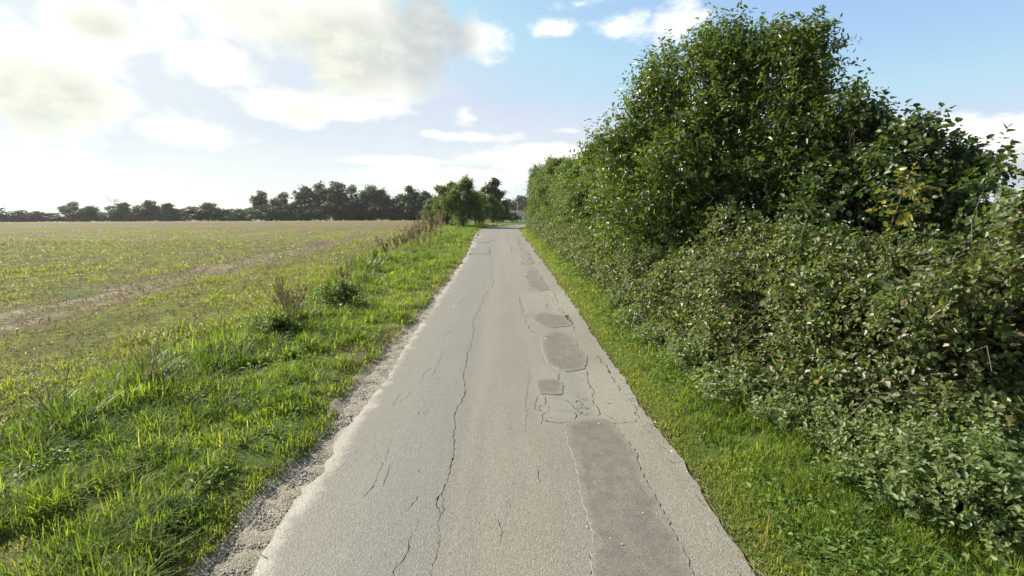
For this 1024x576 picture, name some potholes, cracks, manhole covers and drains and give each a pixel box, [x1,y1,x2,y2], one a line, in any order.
crack [524,356,721,575]
crack [393,243,495,576]
